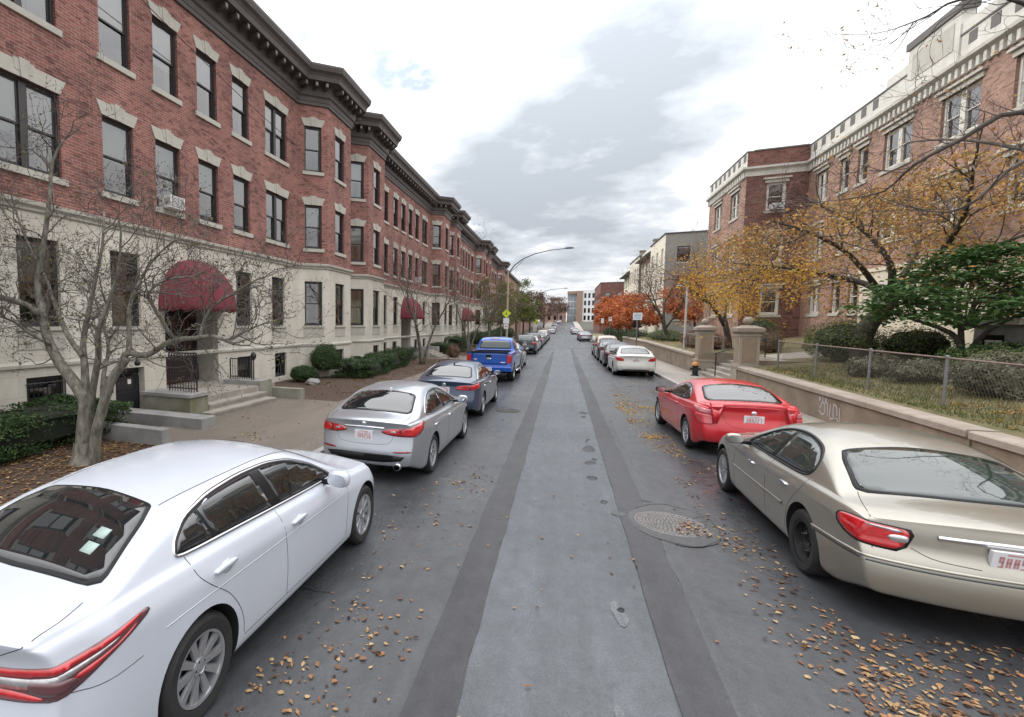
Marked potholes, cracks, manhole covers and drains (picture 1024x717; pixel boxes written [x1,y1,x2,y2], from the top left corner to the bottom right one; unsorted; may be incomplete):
manhole cover [634,512,709,537]
